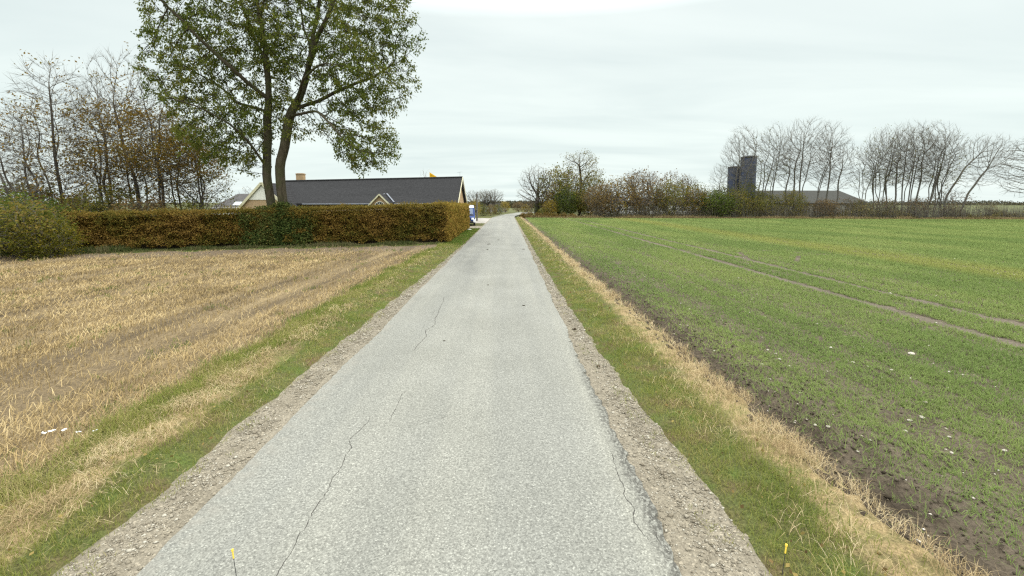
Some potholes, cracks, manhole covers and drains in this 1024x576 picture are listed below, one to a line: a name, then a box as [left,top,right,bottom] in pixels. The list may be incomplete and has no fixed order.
crack [276,418,370,576]
crack [612,454,660,542]
